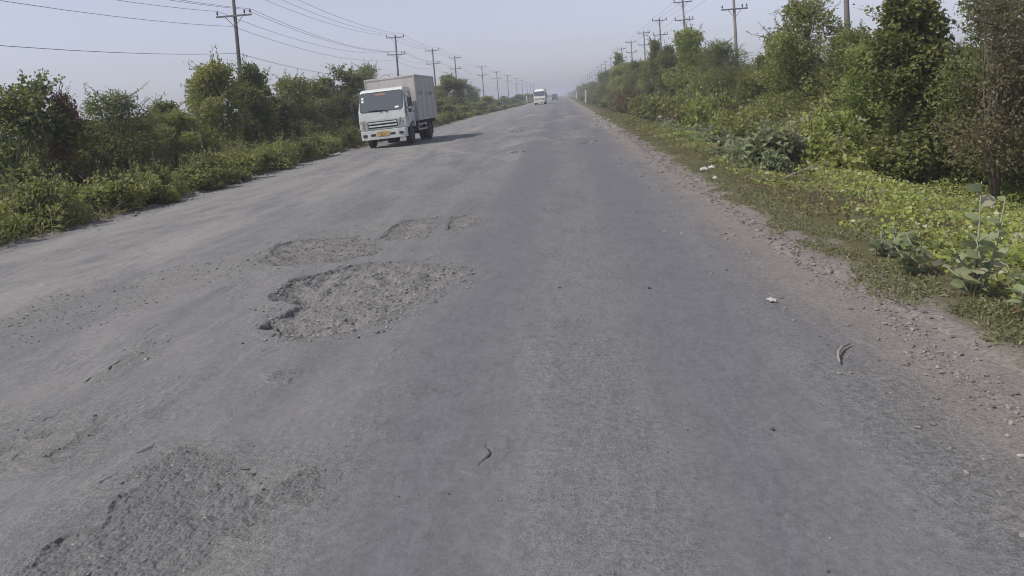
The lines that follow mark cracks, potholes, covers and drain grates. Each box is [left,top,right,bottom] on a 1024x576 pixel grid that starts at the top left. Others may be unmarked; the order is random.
pothole [429,214,490,232]
pothole [229,235,391,269]
pothole [0,437,350,576]
pothole [370,215,450,244]
pothole [241,258,491,351]
